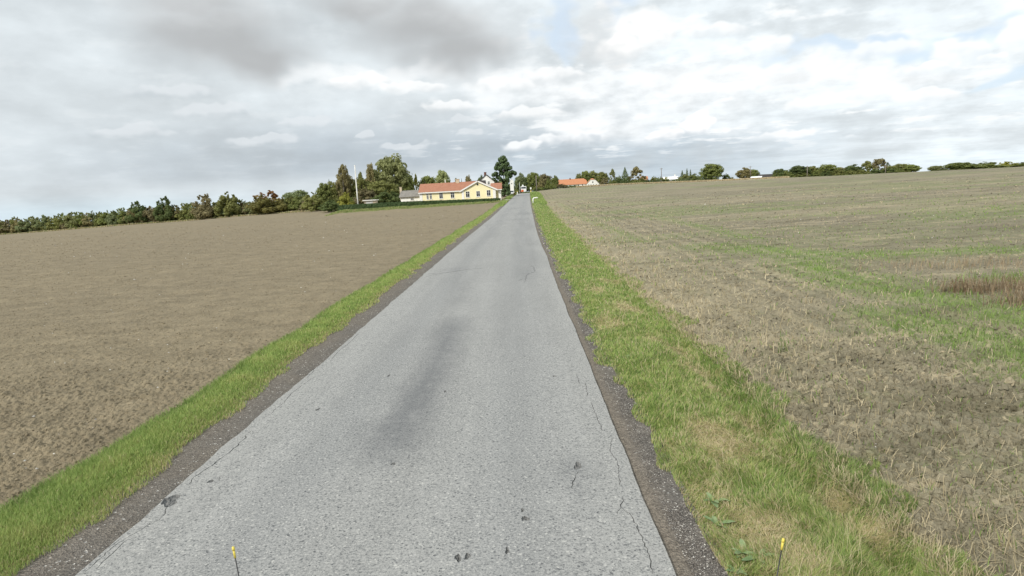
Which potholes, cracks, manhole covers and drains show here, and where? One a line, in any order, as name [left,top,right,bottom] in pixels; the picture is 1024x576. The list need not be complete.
crack [577,376,653,573]
pothole [161,494,181,507]
crack [190,369,314,483]
